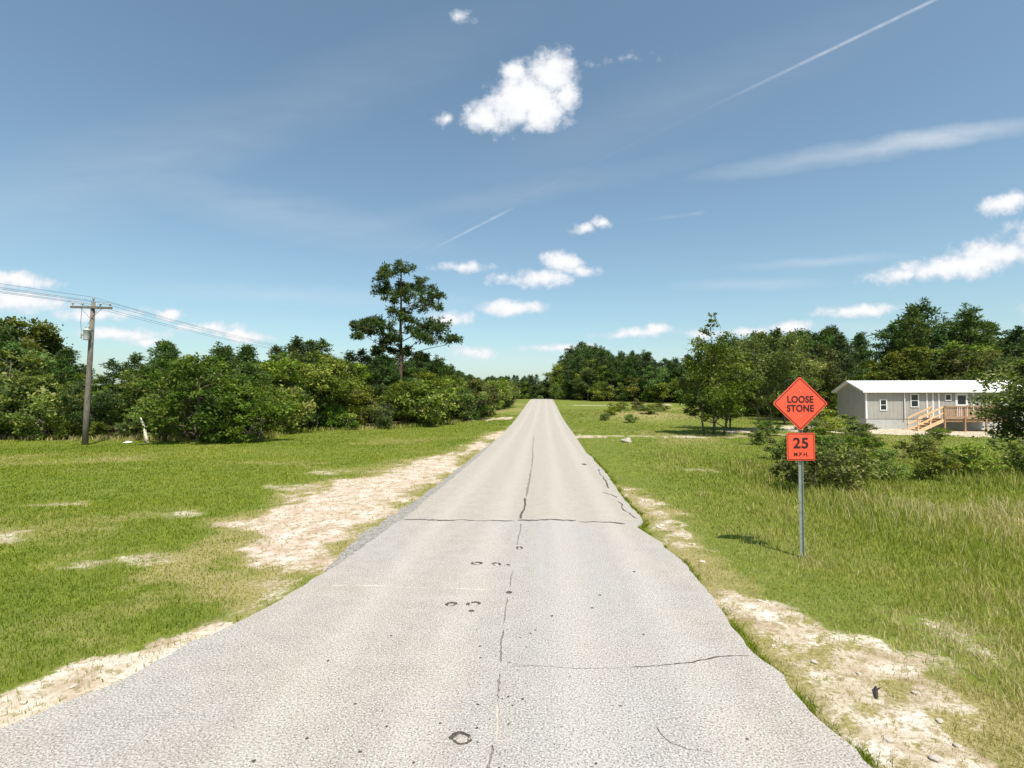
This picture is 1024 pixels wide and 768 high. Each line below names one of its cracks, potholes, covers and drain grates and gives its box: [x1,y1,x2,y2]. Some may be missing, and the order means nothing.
crack [458,571,598,768]
crack [403,437,635,545]
crack [634,655,750,667]
pothole [449,731,472,745]
crack [656,726,709,752]
